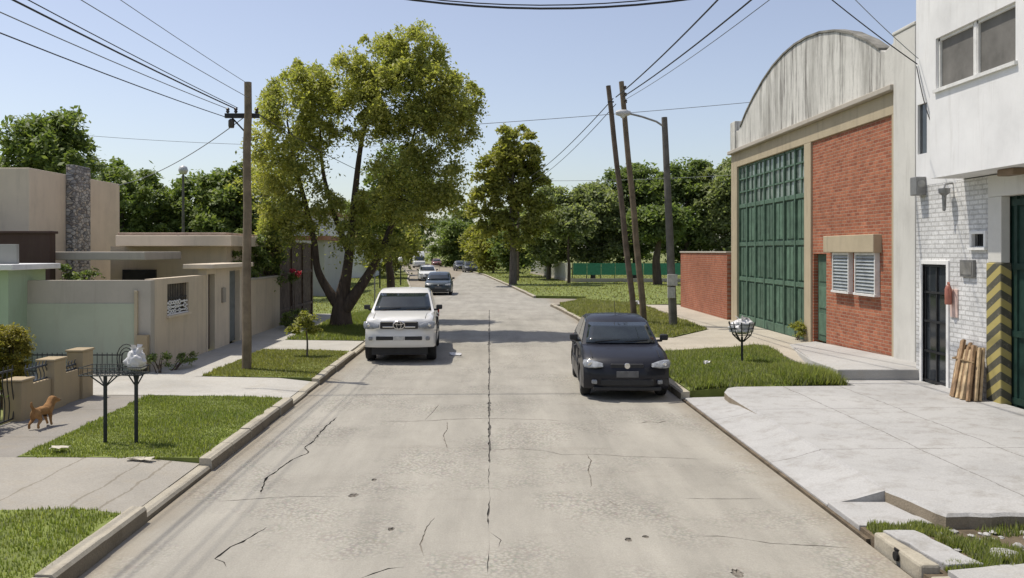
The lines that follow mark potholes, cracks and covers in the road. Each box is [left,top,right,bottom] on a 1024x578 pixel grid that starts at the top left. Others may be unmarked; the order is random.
crack [426,406,558,448]
crack [229,417,341,501]
crack [501,449,690,507]
crack [215,529,264,566]
